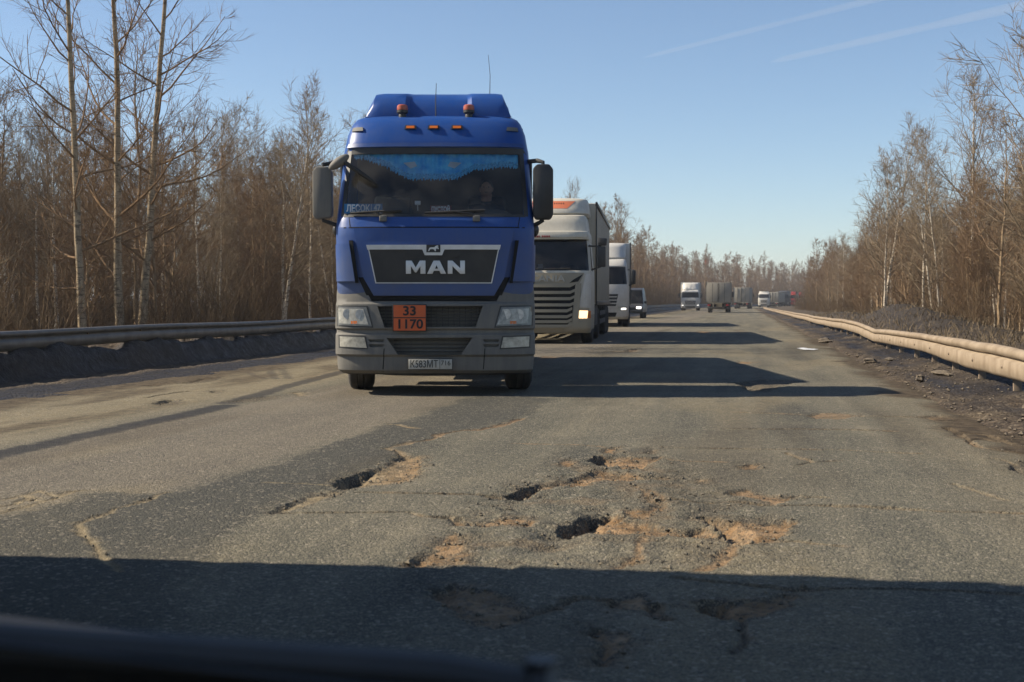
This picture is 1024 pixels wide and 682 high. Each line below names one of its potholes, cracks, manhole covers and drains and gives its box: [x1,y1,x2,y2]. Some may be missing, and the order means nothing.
pothole [554,511,718,540]
pothole [585,455,671,470]
pothole [421,583,534,630]
pothole [329,455,429,491]
pothole [398,534,476,568]
pothole [481,467,674,501]
crack [941,427,1023,465]
pothole [686,590,804,626]
crack [0,489,169,572]
pothole [695,515,802,547]
